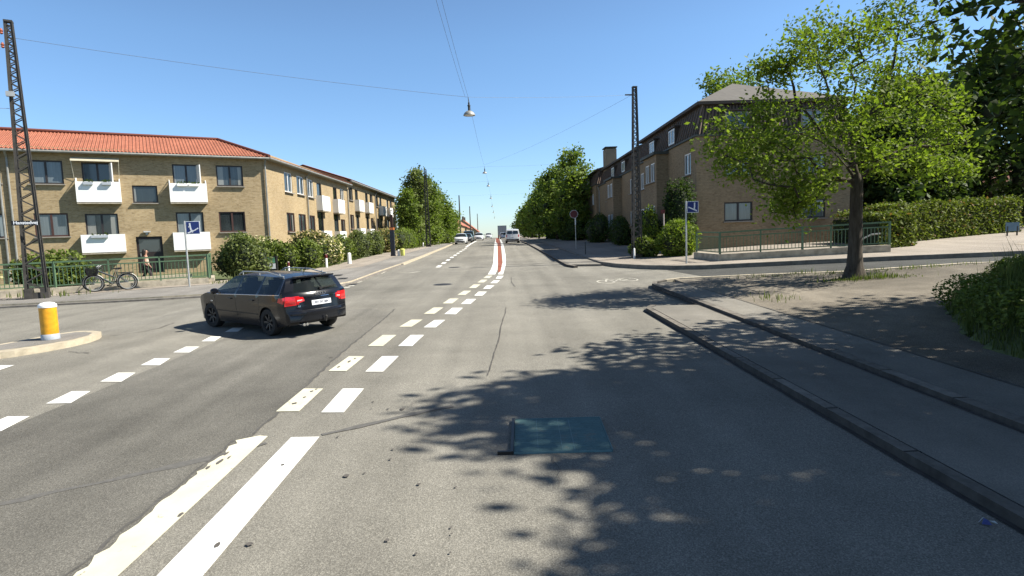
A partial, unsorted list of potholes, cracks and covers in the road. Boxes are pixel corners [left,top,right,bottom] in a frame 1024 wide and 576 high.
utility cover [497,417,613,455]
crack [487,309,506,375]
